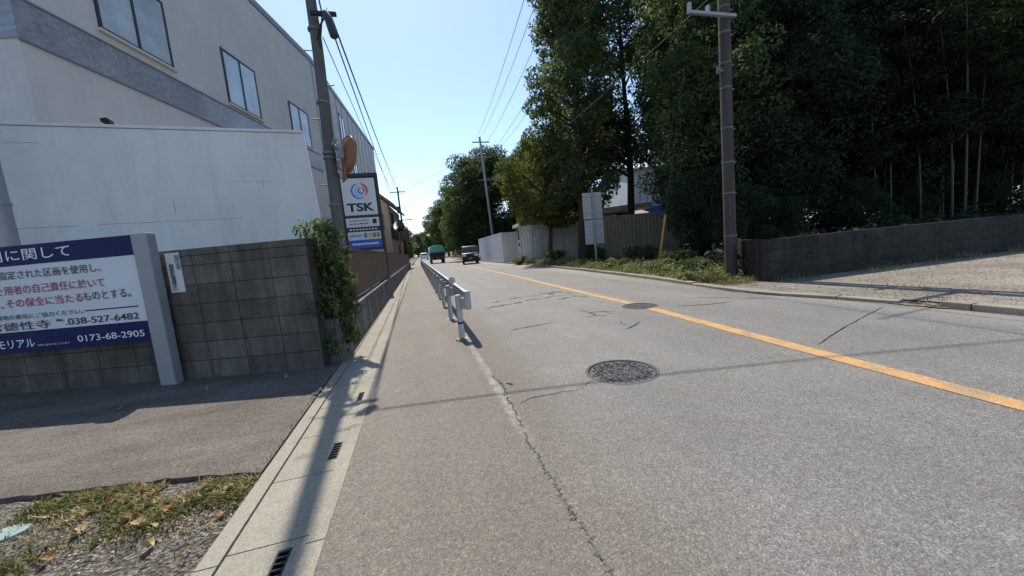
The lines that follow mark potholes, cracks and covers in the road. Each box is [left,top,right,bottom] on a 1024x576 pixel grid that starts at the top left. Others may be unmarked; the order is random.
drain grate [327,441,343,461]
manhole cover [586,359,660,385]
crack [487,291,639,329]
crack [492,375,614,576]
drain grate [267,547,293,576]
